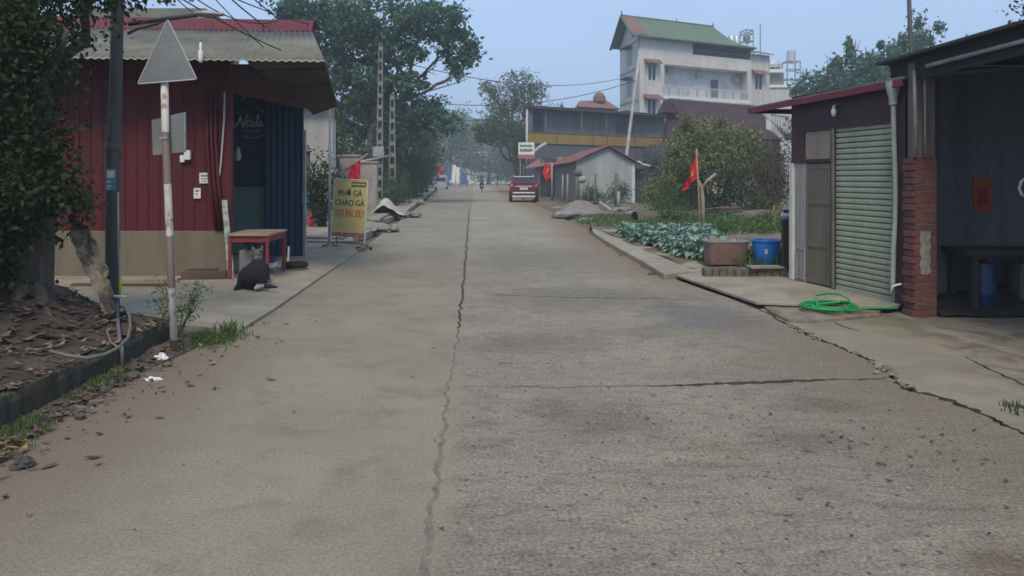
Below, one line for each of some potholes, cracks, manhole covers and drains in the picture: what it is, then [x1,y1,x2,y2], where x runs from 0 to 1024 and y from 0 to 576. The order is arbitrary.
crack [419,206,1024,576]
